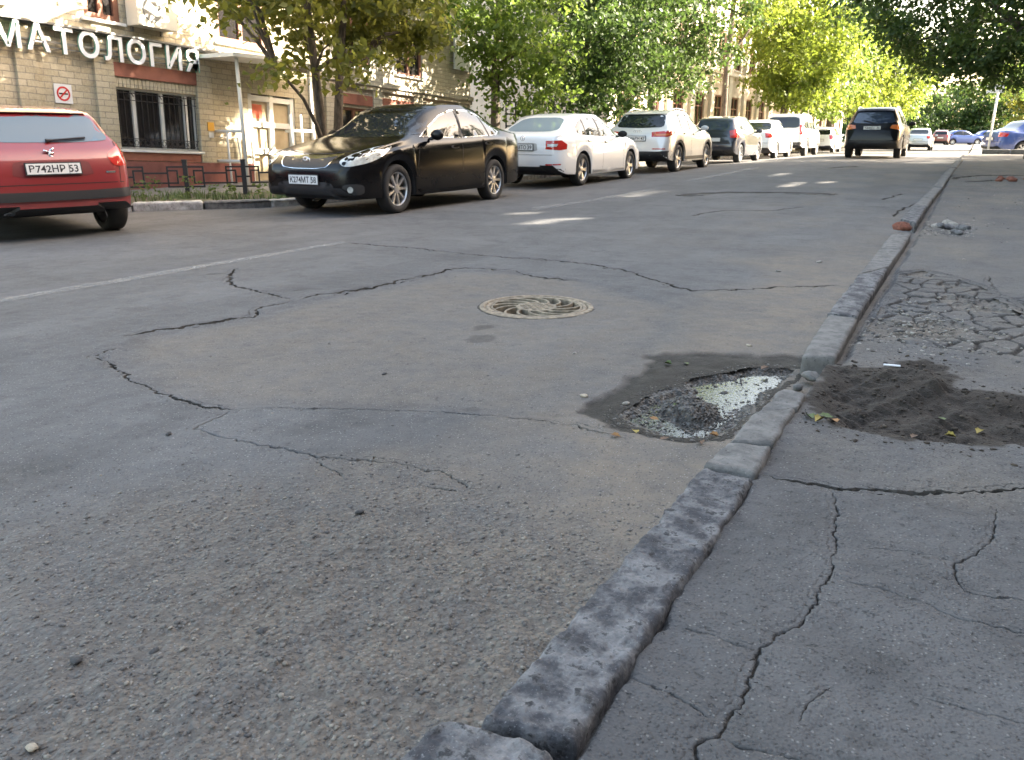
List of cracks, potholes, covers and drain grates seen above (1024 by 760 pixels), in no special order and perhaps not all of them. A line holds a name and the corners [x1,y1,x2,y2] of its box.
crack [87,243,1024,500]
manhole cover [477,295,595,320]
pothole [606,364,802,442]
crack [627,490,1024,760]
crack [677,191,835,216]
